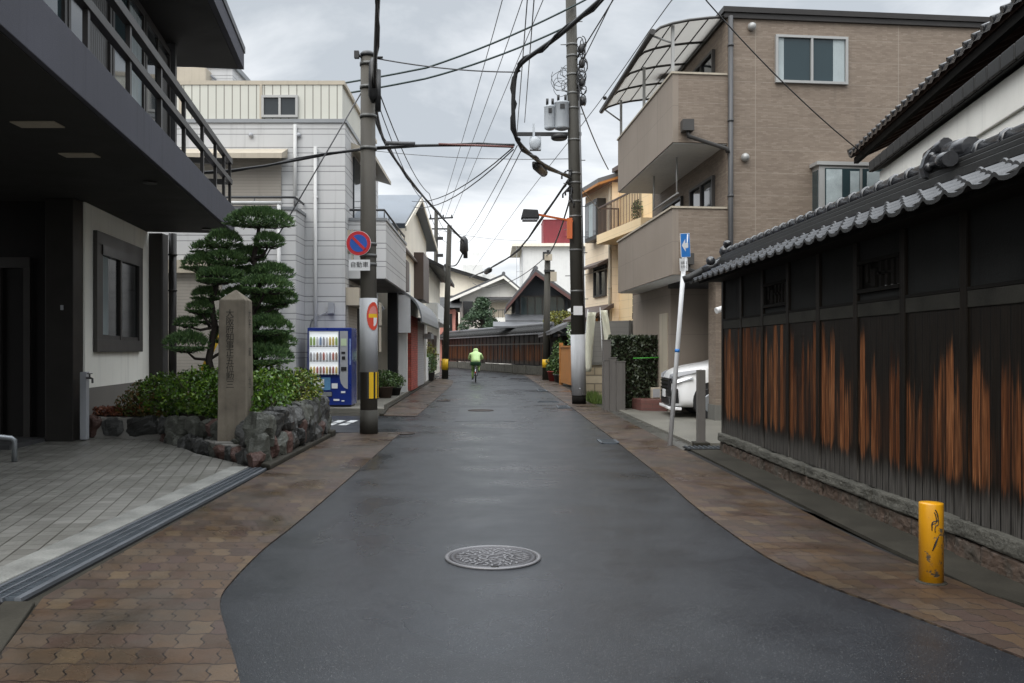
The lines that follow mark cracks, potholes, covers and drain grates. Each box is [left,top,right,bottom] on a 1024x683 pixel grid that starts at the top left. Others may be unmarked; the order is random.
manhole cover [445,545,541,570]
